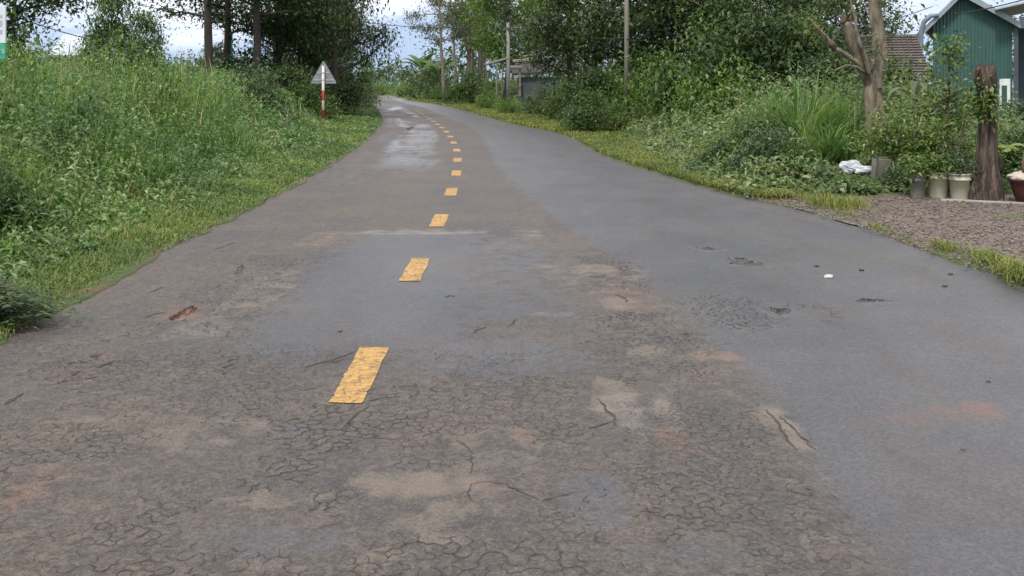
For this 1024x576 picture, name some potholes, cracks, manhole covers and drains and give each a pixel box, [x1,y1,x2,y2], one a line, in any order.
crack [192,381,625,576]
pothole [154,303,214,325]
crack [400,348,616,428]
crack [103,254,337,347]
crack [573,331,872,576]
pothole [717,256,779,269]
crack [575,252,845,339]
crack [0,344,357,576]
pothole [749,305,805,319]
pothole [843,296,908,306]
